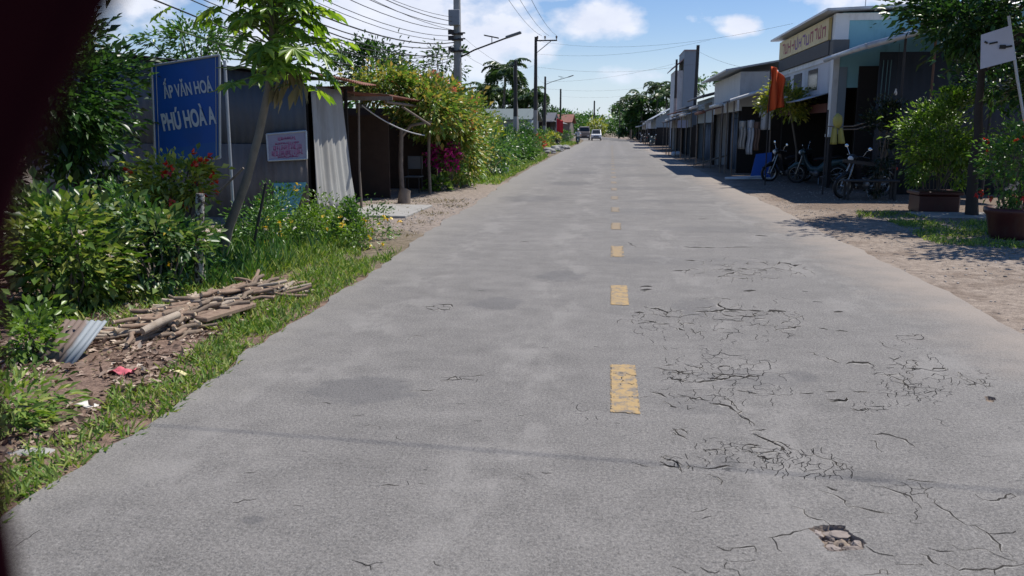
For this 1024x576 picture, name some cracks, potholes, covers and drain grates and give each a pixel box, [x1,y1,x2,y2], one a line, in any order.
crack [402,374,483,392]
crack [616,235,1024,576]
crack [423,304,453,313]
pothole [809,525,868,552]
